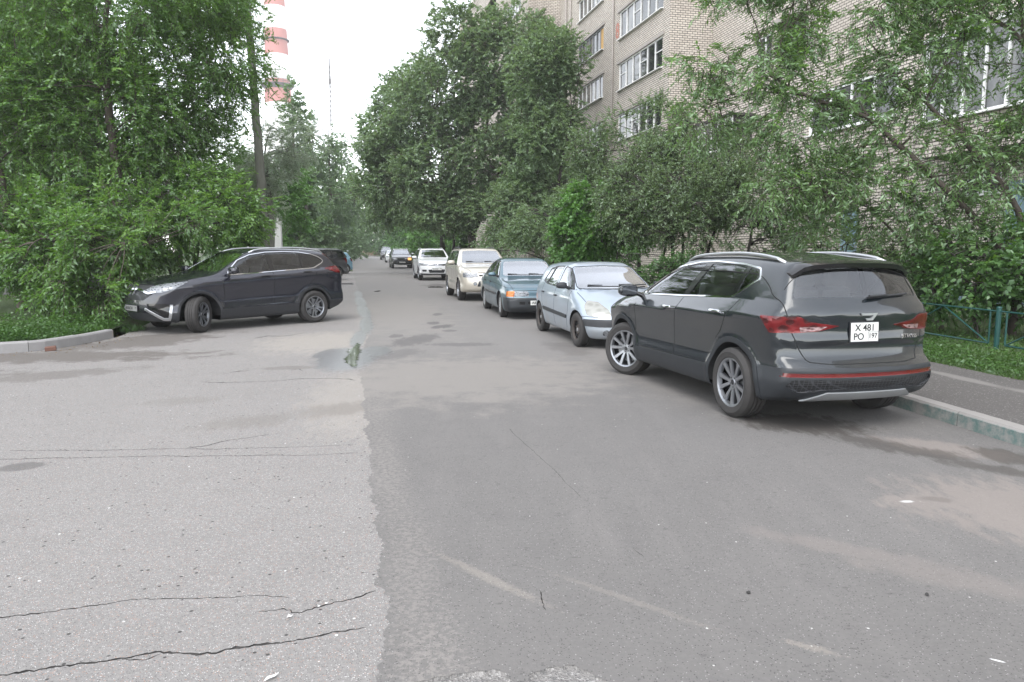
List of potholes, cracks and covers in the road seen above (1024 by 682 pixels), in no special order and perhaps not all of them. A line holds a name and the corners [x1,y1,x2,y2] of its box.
crack [0,590,376,676]
crack [10,434,343,459]
